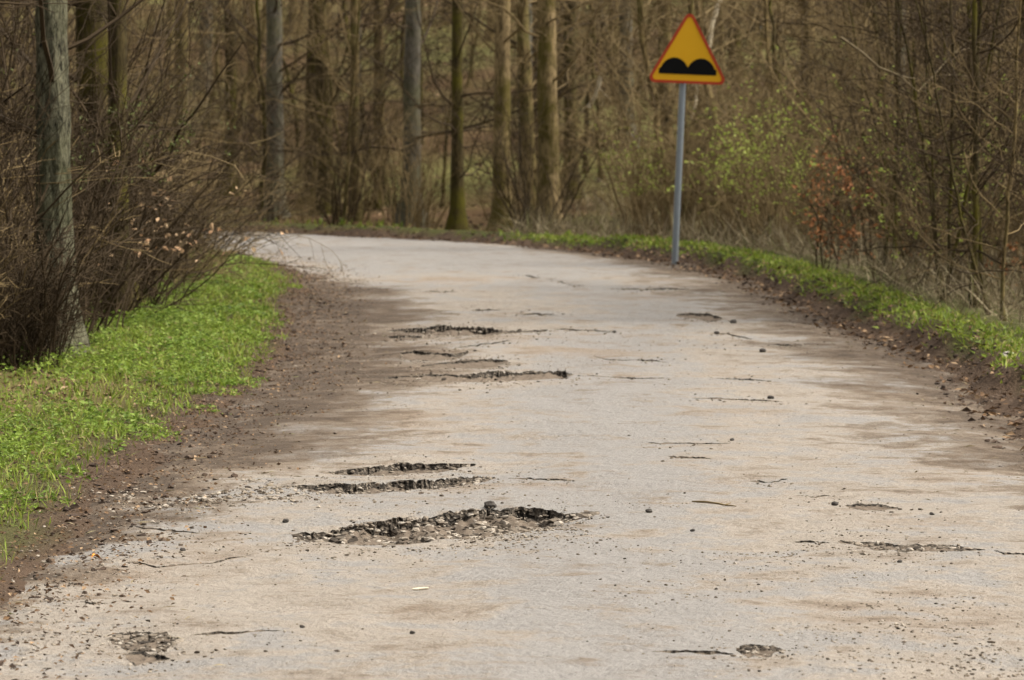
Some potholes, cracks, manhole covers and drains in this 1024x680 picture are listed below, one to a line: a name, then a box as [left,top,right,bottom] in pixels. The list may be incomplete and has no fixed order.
pothole [388,325,547,336]
pothole [845,503,898,511]
pothole [838,540,985,552]
pothole [384,370,573,383]
pothole [282,476,496,494]
pothole [327,462,476,476]
crack [138,554,252,568]
pothole [676,313,722,321]
crack [752,479,830,498]
crack [588,357,667,379]
pothole [292,506,577,545]
